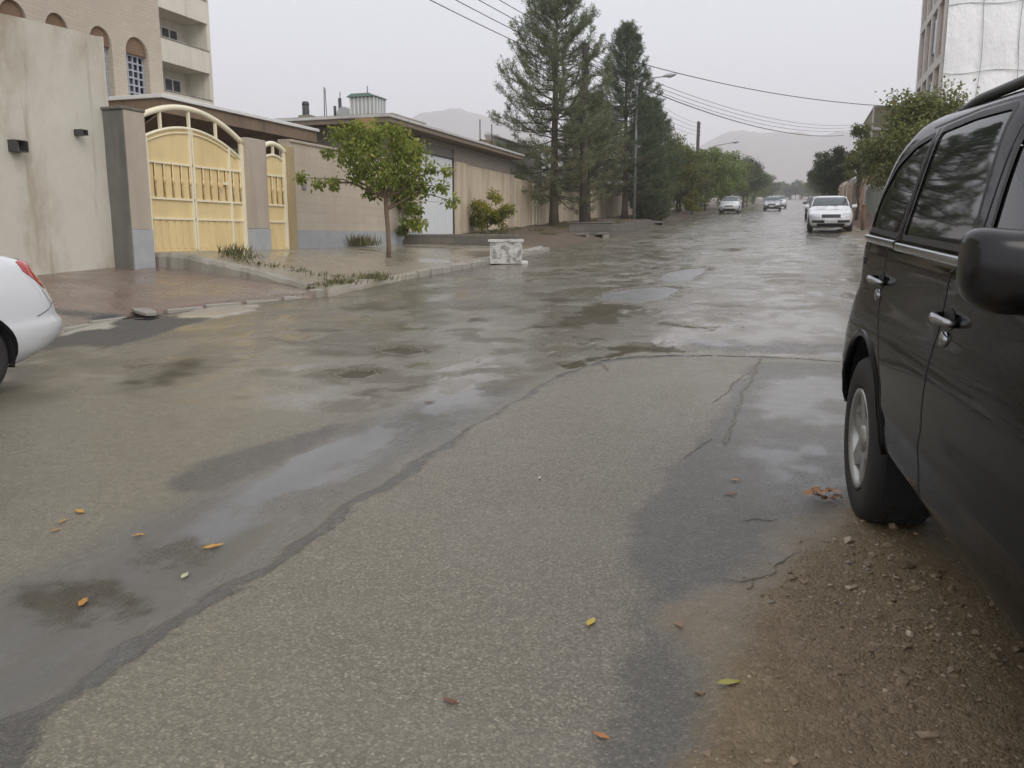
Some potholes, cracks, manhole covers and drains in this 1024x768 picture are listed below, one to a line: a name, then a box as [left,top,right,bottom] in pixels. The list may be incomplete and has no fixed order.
pothole [331,368,380,379]
crack [597,355,842,457]
crack [718,553,796,590]
pothole [376,346,426,356]
